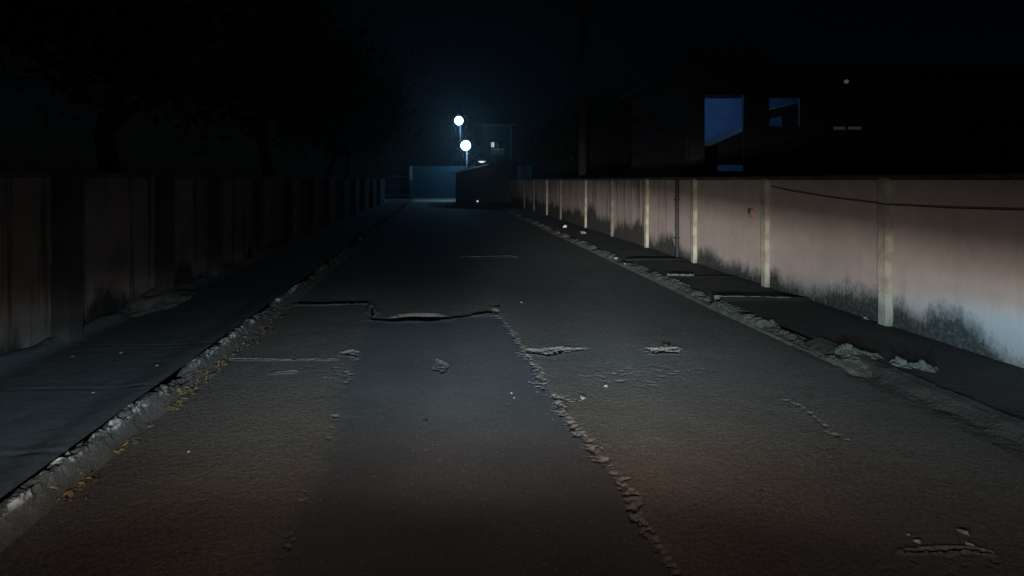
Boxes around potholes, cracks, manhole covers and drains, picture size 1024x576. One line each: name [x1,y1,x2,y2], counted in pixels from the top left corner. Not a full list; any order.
crack [779,398,855,442]
pothole [339,349,362,357]
crack [901,545,995,554]
pothole [521,346,593,356]
pothole [431,358,450,374]
pothole [642,346,684,354]
crack [367,304,683,576]
